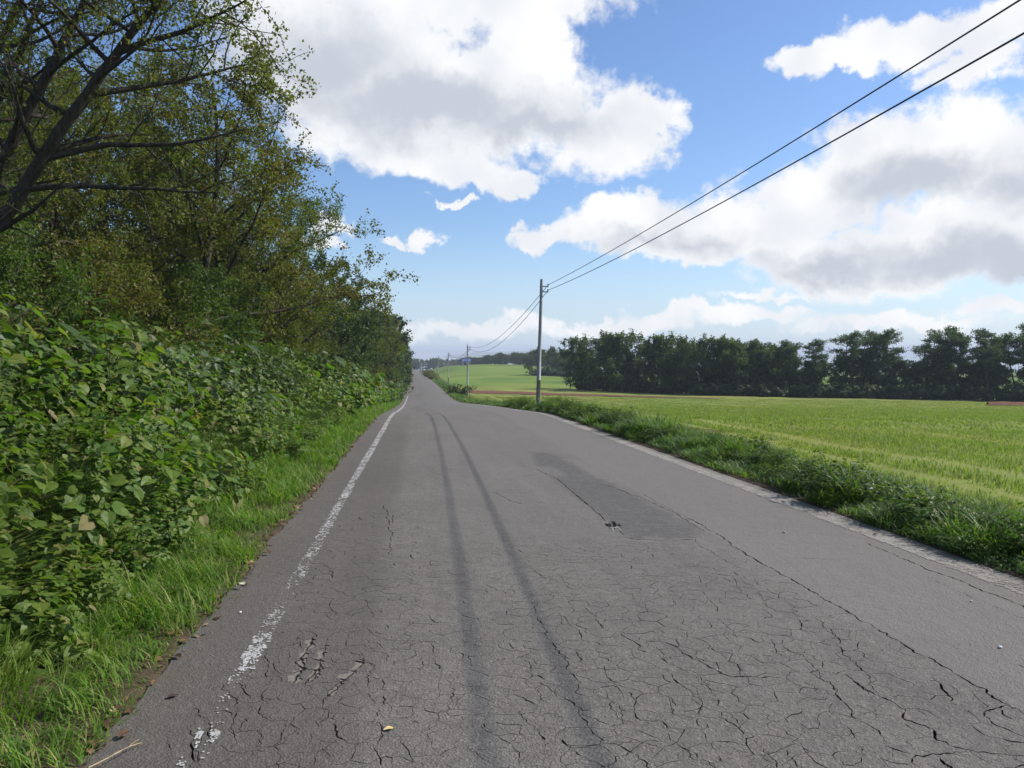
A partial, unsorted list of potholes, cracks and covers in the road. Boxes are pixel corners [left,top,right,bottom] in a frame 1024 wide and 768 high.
crack [189,469,1024,768]
